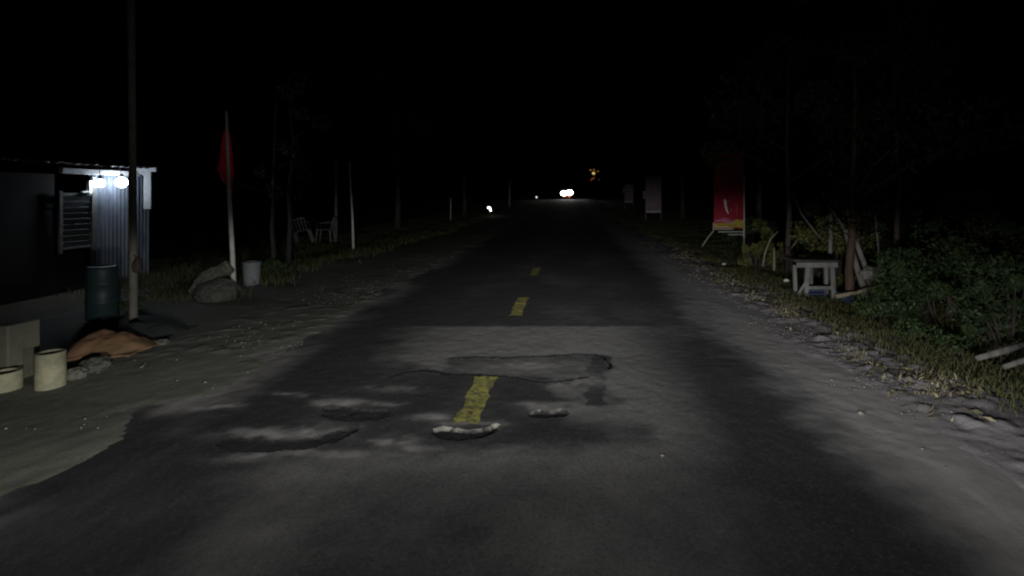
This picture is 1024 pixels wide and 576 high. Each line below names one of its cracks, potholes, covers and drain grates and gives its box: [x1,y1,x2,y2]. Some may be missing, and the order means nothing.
pothole [213,426,361,453]
pothole [319,406,395,422]
pothole [527,409,571,418]
pothole [430,423,501,442]
